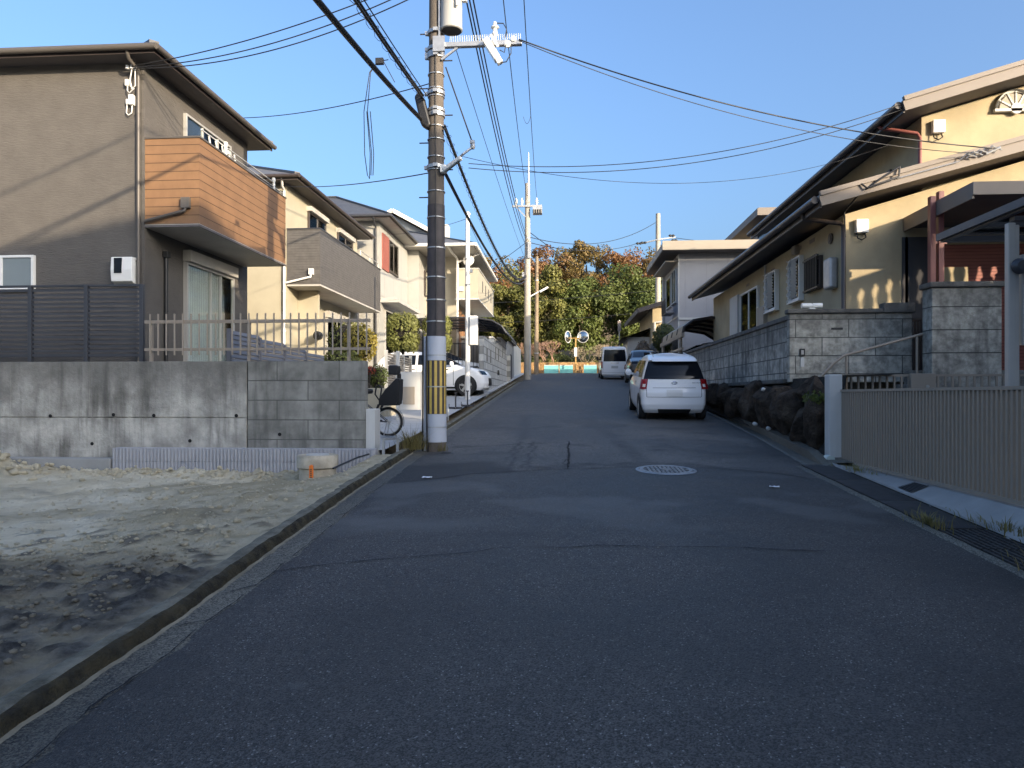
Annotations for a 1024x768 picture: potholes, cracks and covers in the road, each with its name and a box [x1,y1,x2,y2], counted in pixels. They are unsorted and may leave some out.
crack [454,442,570,469]
drain grate [899,482,929,492]
drain grate [982,549,1024,571]
drain grate [939,529,1024,551]
manhole cover [636,465,697,475]
